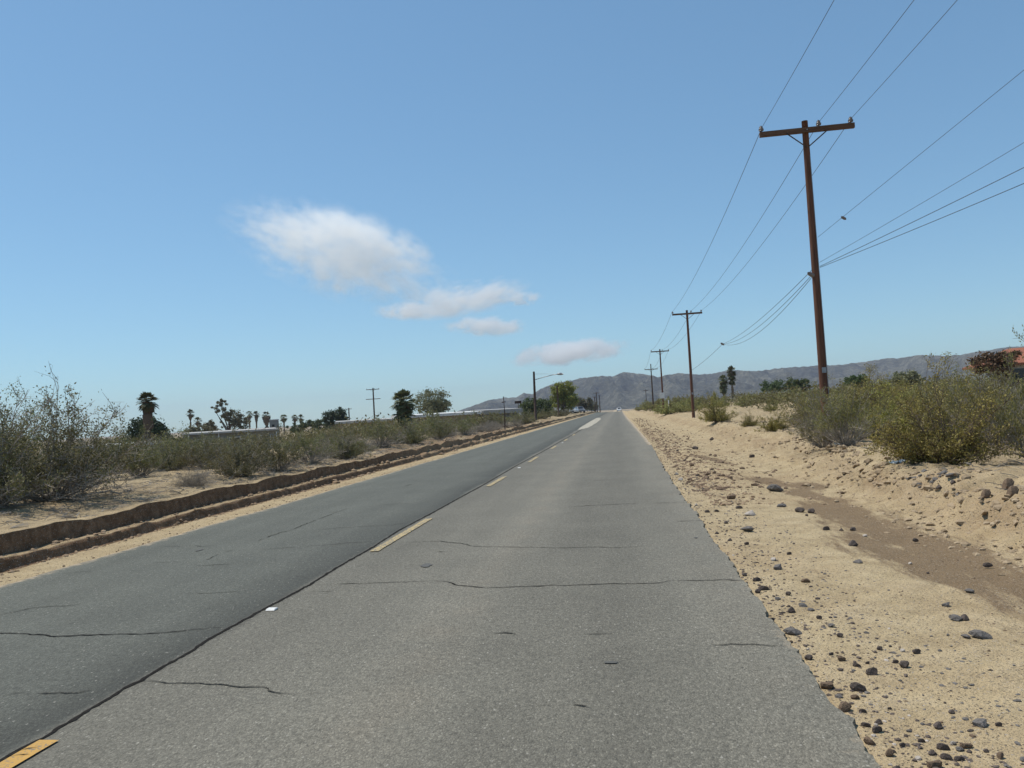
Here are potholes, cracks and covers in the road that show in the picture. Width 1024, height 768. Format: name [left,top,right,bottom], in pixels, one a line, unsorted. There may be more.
crack [435,580,670,588]
crack [21,627,214,637]
crack [402,541,647,552]
crack [141,680,291,694]
